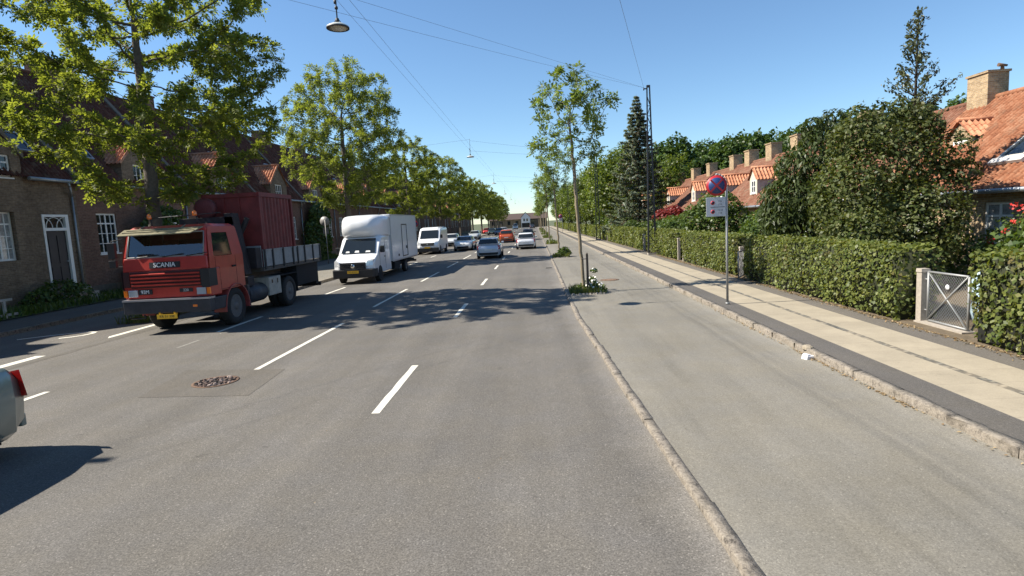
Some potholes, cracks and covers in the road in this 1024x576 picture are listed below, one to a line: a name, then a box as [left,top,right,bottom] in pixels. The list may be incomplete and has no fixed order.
manhole cover [191,375,240,388]
